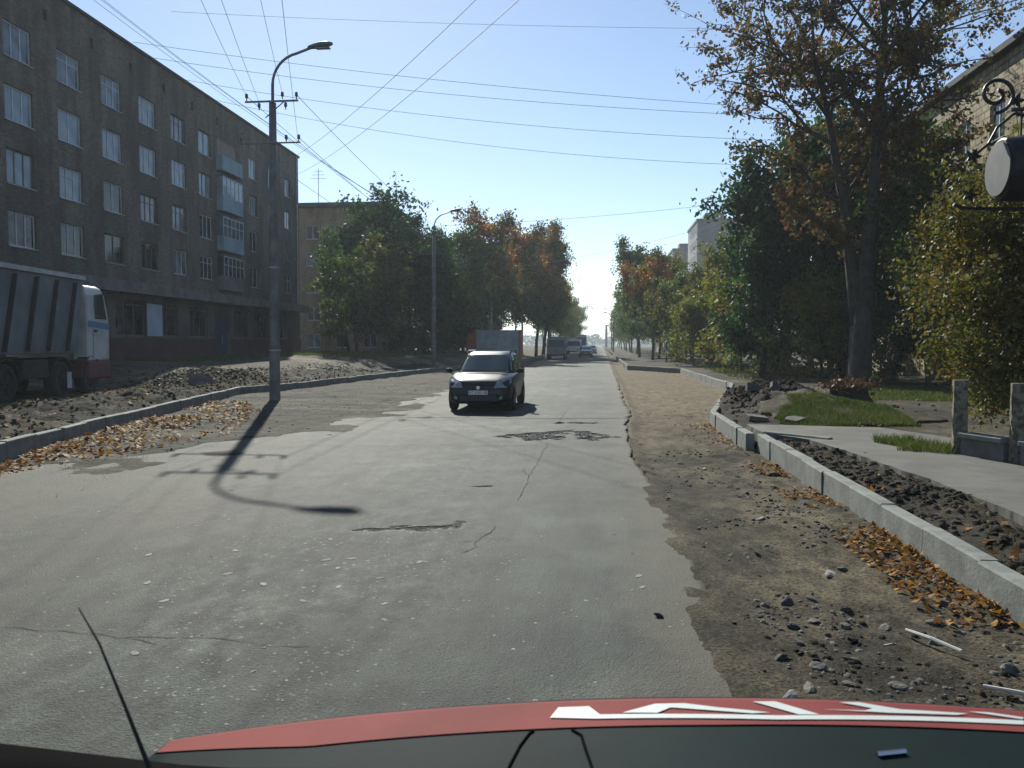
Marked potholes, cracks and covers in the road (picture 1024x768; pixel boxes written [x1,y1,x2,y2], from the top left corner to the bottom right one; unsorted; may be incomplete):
pothole [353,521,467,532]
pothole [497,430,622,441]
crack [19,627,285,646]
